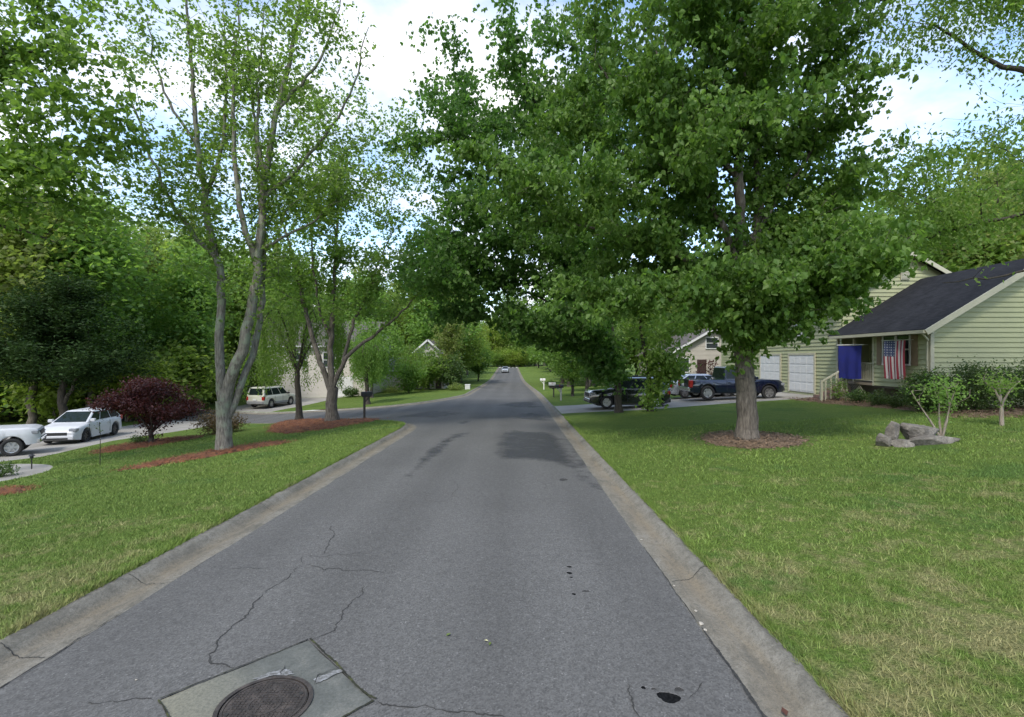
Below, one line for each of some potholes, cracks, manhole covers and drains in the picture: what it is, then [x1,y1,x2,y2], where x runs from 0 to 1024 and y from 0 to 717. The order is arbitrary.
crack [208,526,381,668]
manhole cover [212,675,313,717]
